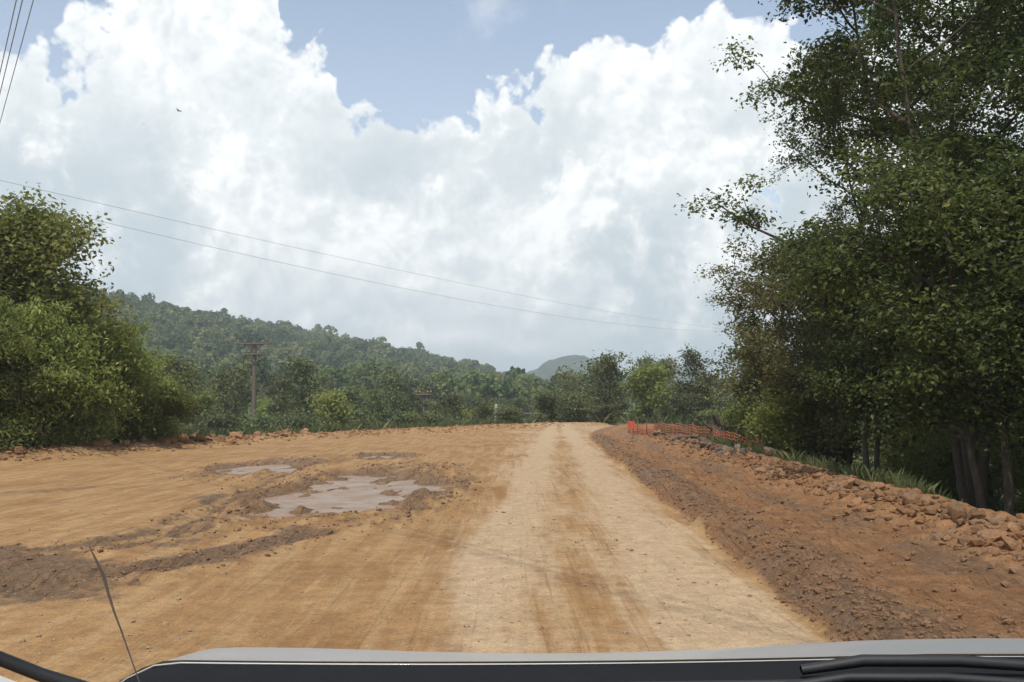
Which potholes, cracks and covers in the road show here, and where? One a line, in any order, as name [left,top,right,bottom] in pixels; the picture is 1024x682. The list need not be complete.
pothole [347,451,426,461]
pothole [186,461,479,533]
